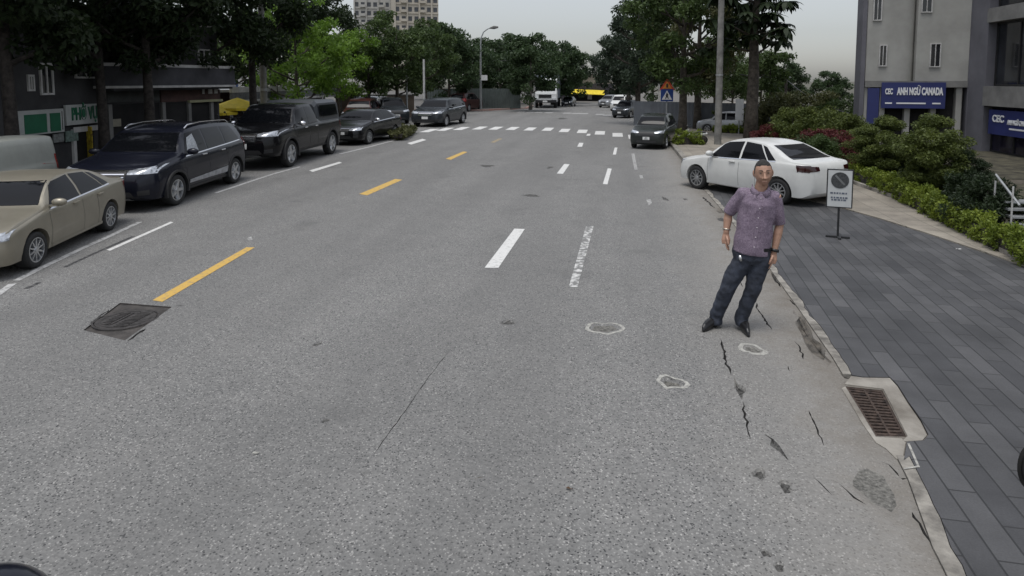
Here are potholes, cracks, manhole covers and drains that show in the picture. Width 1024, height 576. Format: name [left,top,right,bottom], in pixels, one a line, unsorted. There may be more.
pothole [738,343,768,355]
pothole [585,322,625,335]
manhole cover [84,303,171,340]
crack [373,354,447,455]
crack [766,435,788,460]
pothole [777,479,792,494]
pothole [793,308,832,366]
drain grate [846,387,906,456]
pothole [751,468,766,479]
pothole [656,374,690,389]
